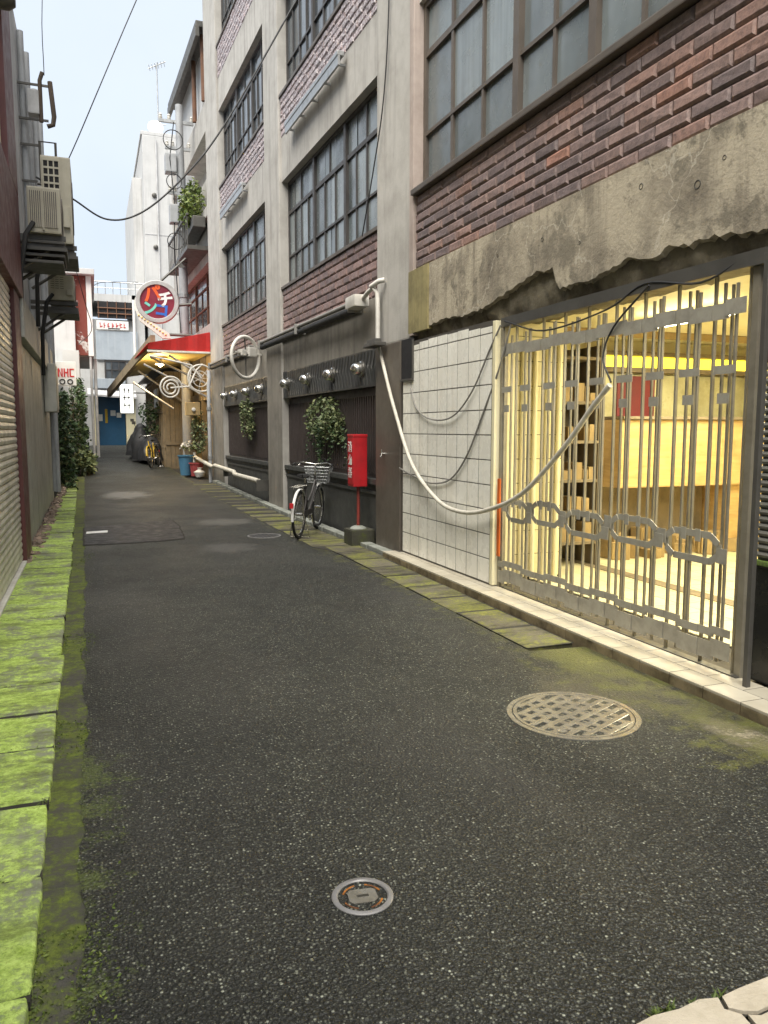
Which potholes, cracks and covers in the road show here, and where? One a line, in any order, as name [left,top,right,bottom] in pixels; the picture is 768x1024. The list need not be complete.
manhole cover [507,692,642,741]
utility cover [331,877,394,916]
